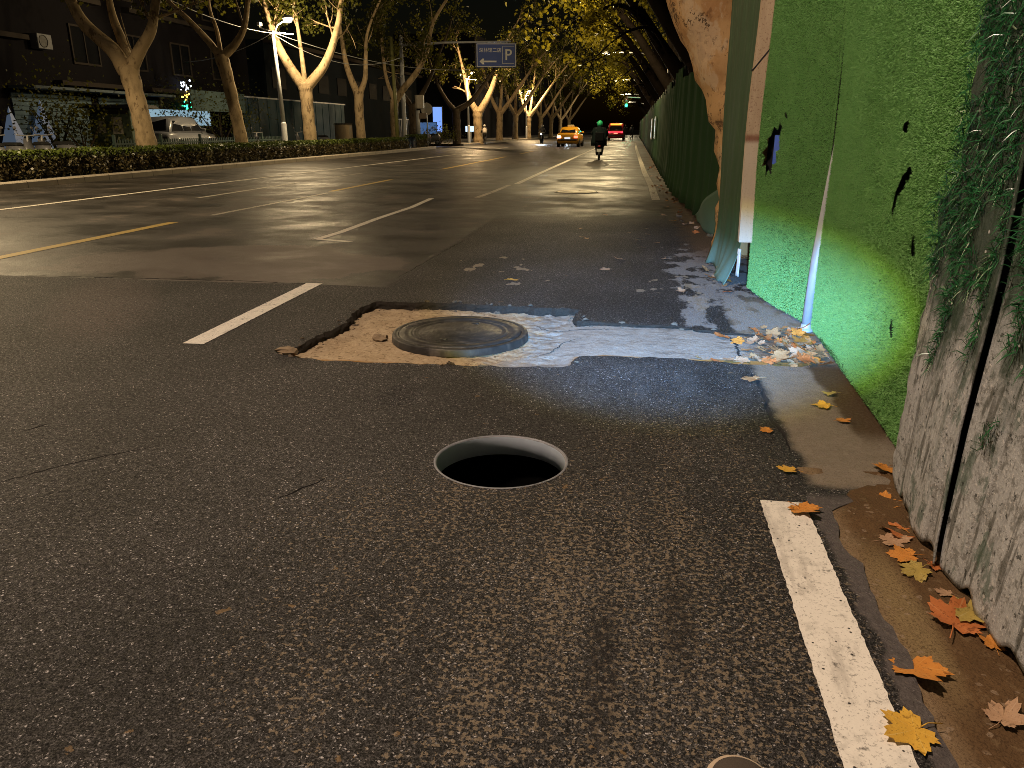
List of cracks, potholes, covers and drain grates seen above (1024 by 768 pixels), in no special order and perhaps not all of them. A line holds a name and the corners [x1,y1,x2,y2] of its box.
manhole cover [392,316,528,357]
crack [0,446,157,483]
crack [276,478,325,500]
